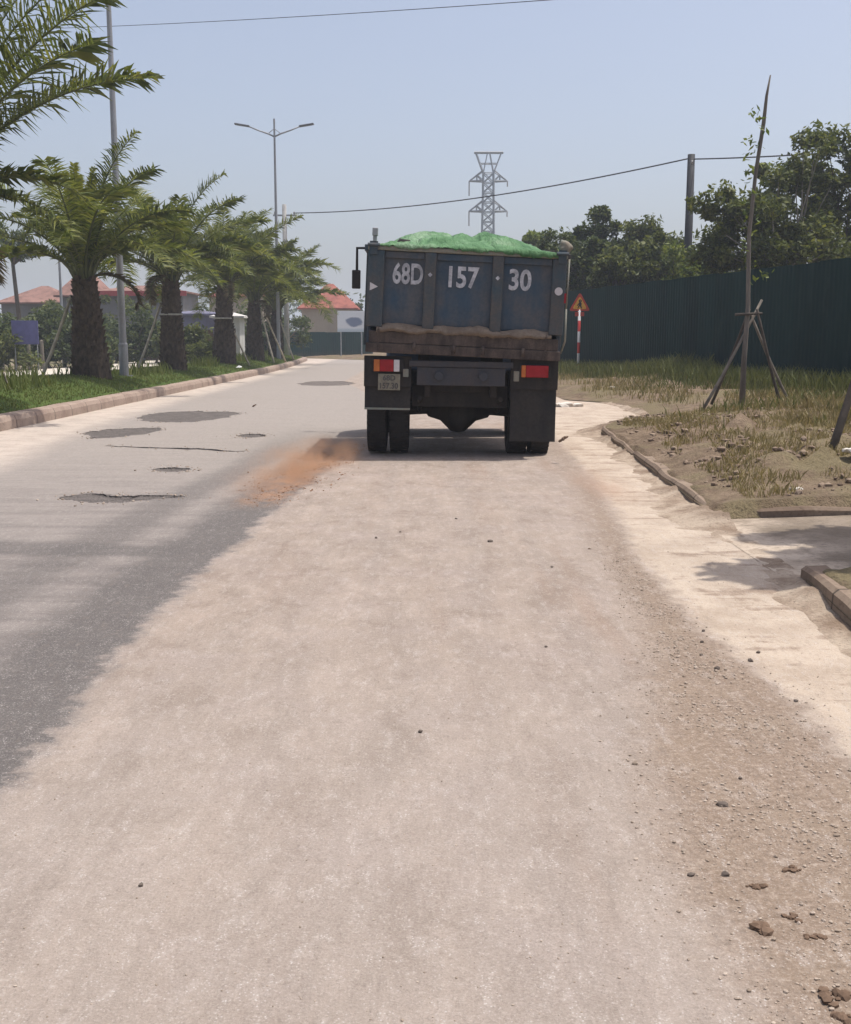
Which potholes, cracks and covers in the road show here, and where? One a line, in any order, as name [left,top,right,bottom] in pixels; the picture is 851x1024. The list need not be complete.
pothole [82,427,161,439]
pothole [137,411,239,423]
pothole [59,493,186,503]
